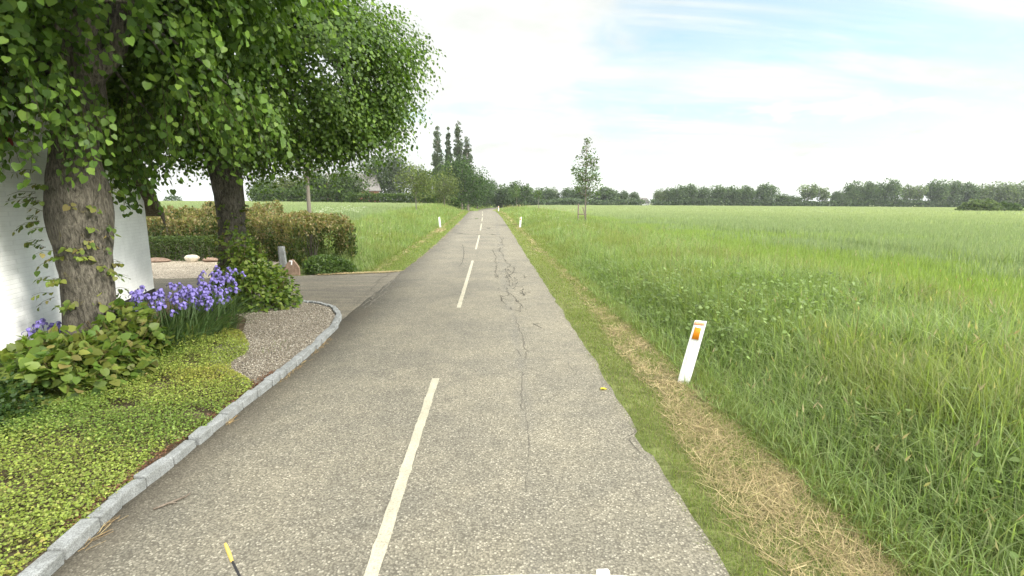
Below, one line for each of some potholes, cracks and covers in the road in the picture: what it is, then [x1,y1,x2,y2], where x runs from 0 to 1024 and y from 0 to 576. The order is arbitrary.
crack [459,228,540,493]
